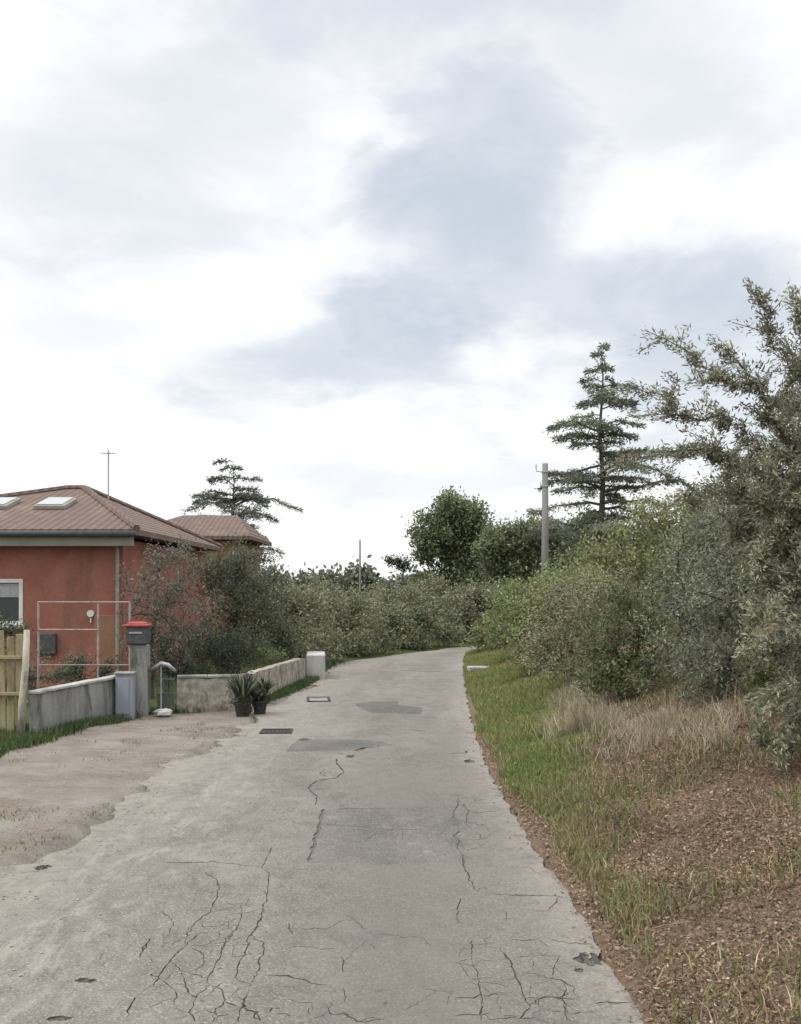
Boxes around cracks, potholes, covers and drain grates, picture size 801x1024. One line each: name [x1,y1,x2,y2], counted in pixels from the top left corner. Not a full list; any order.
pothole [573,953,603,967]
crack [93,847,446,1023]
crack [307,744,425,862]
crack [428,794,631,1023]
